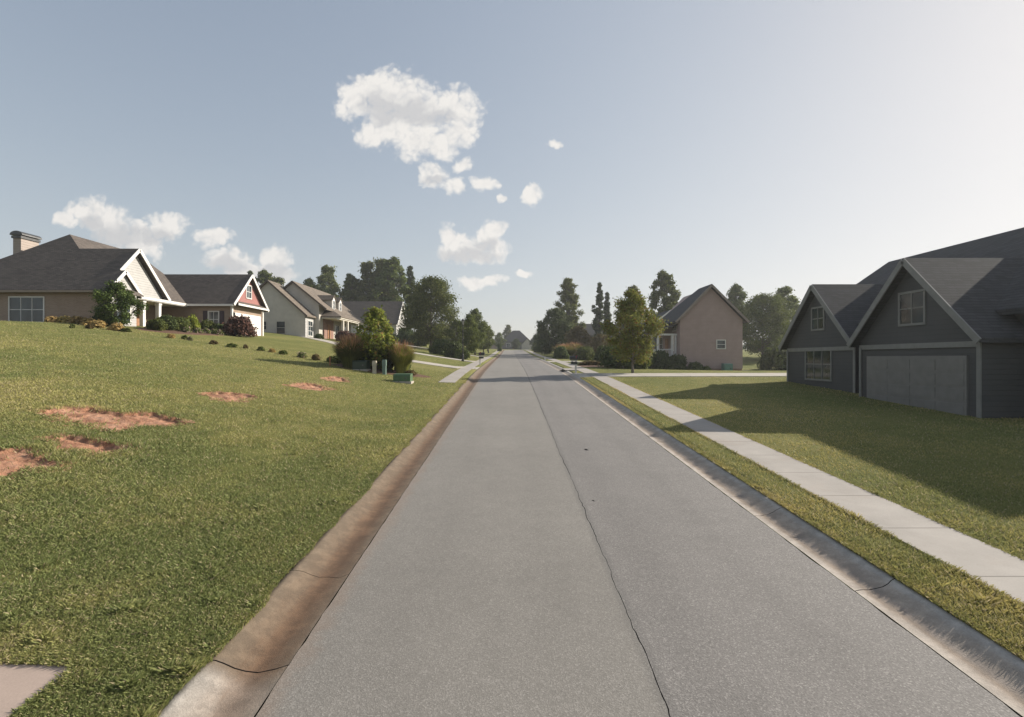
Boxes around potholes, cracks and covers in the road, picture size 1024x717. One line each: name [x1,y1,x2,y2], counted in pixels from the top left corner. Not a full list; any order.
crack [522,366,670,717]
